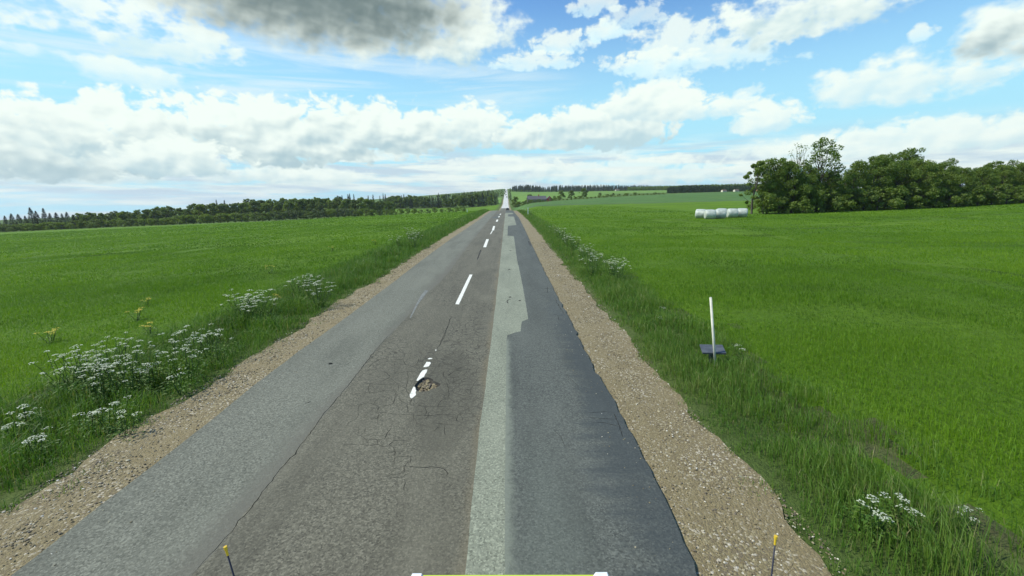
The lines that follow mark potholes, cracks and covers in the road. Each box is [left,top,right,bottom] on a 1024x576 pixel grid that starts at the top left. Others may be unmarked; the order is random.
crack [336,305,467,503]
pothole [415,377,440,392]
